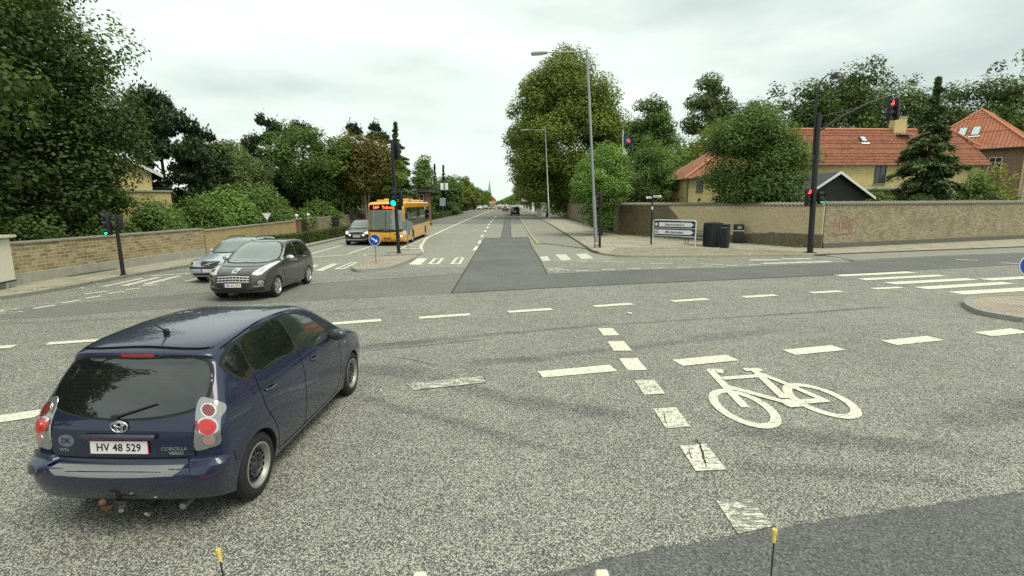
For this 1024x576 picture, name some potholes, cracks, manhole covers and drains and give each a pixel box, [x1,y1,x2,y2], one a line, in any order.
crack [689,439,708,466]
